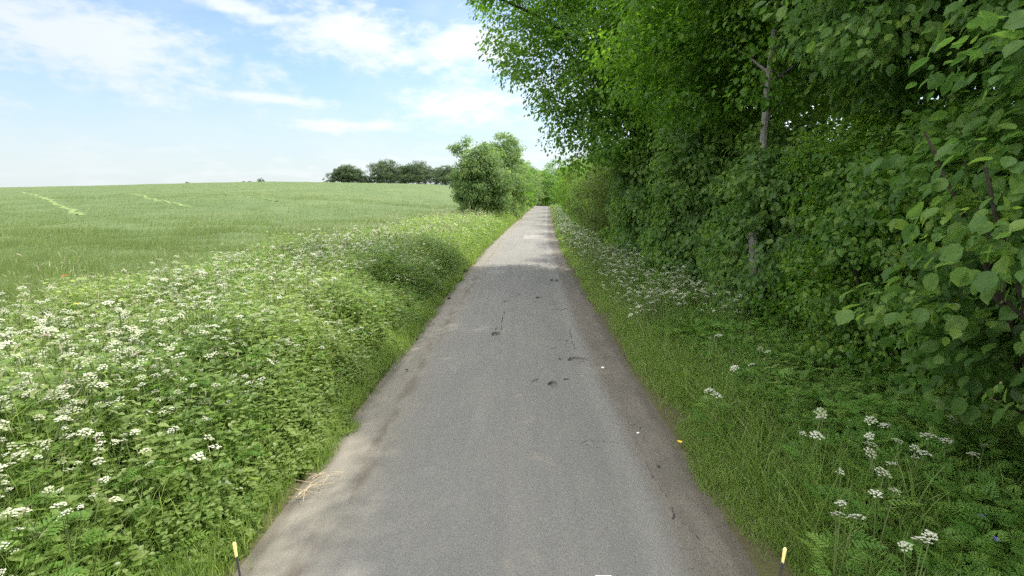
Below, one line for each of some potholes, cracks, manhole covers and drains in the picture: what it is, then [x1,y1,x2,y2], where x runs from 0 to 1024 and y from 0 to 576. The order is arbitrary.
crack [546,308,587,349]
crack [645,462,703,542]
